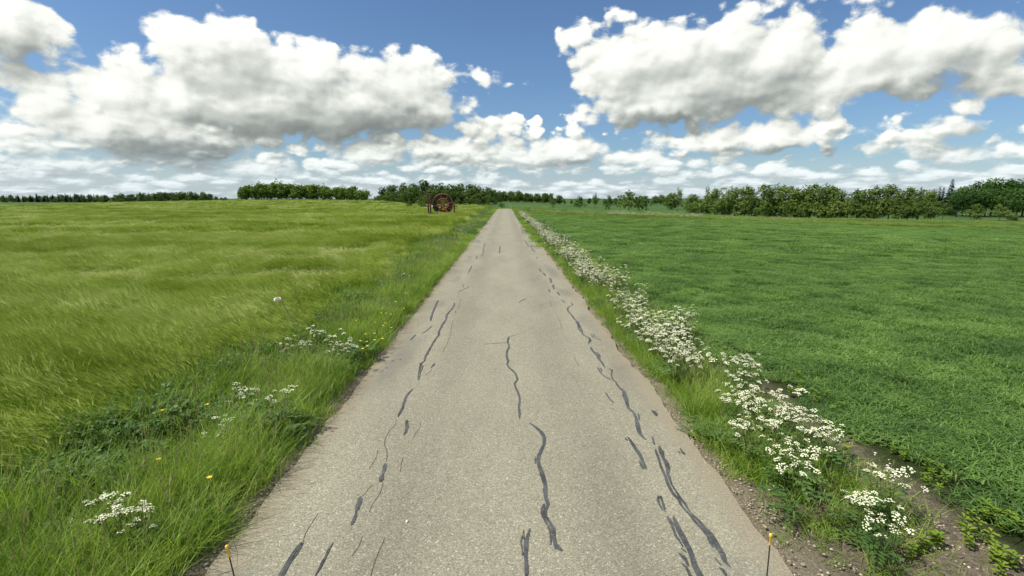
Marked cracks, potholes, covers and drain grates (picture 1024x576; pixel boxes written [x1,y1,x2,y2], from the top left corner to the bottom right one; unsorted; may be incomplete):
crack [363,422,403,512]
crack [352,535,385,576]
